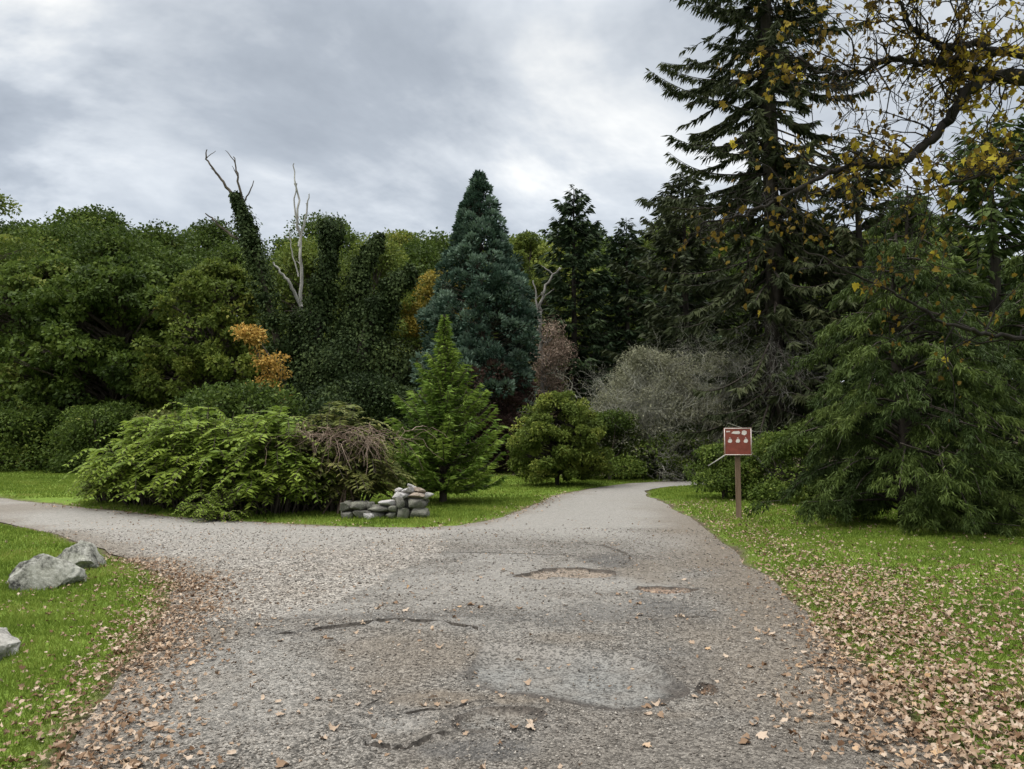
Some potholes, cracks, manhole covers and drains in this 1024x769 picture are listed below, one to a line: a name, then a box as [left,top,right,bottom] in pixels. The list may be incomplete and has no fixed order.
pothole [634,586,699,594]
pothole [512,567,616,580]
crack [252,618,478,635]
crack [365,731,444,751]
crack [406,700,493,714]
pothole [694,682,719,695]
